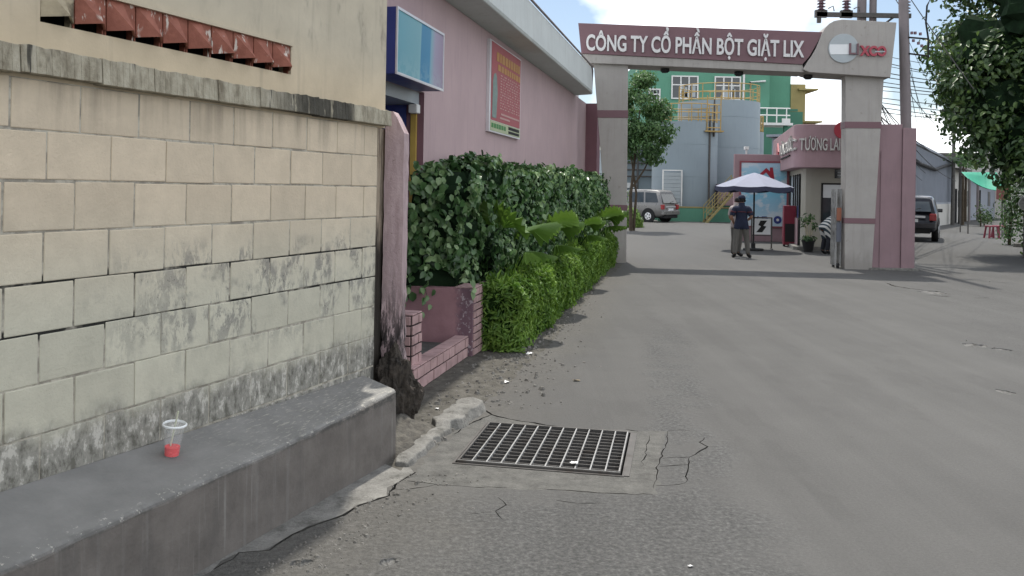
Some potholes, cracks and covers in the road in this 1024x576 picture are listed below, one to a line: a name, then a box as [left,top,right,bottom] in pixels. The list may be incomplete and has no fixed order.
crack [214,432,708,569]
drain grate [452,422,637,477]
